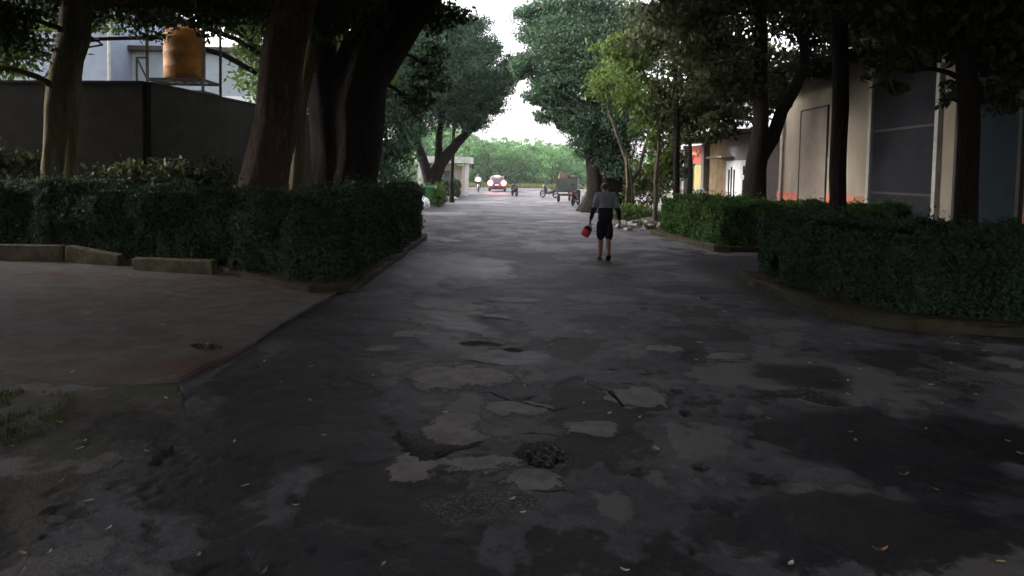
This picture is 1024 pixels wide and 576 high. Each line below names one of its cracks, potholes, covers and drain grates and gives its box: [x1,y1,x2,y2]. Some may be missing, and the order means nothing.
pothole [687,462,712,472]
crack [594,368,667,416]
pothole [390,429,484,461]
crack [483,392,571,411]
pothole [147,445,192,468]
pothole [512,441,574,470]
